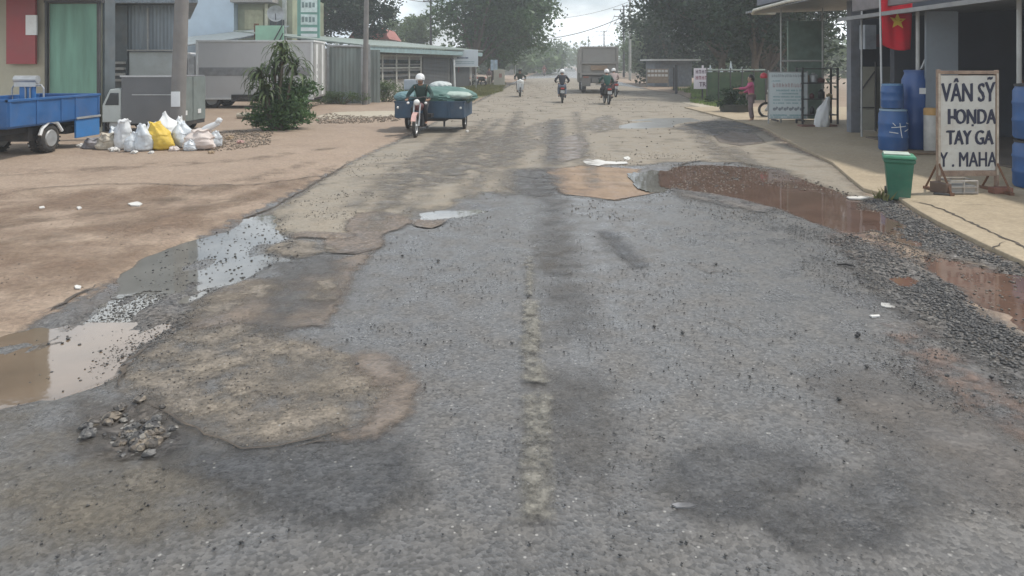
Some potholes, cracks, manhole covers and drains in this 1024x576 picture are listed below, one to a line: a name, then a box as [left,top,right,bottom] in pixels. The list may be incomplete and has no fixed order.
pothole [77,399,182,459]
pothole [671,188,782,212]
